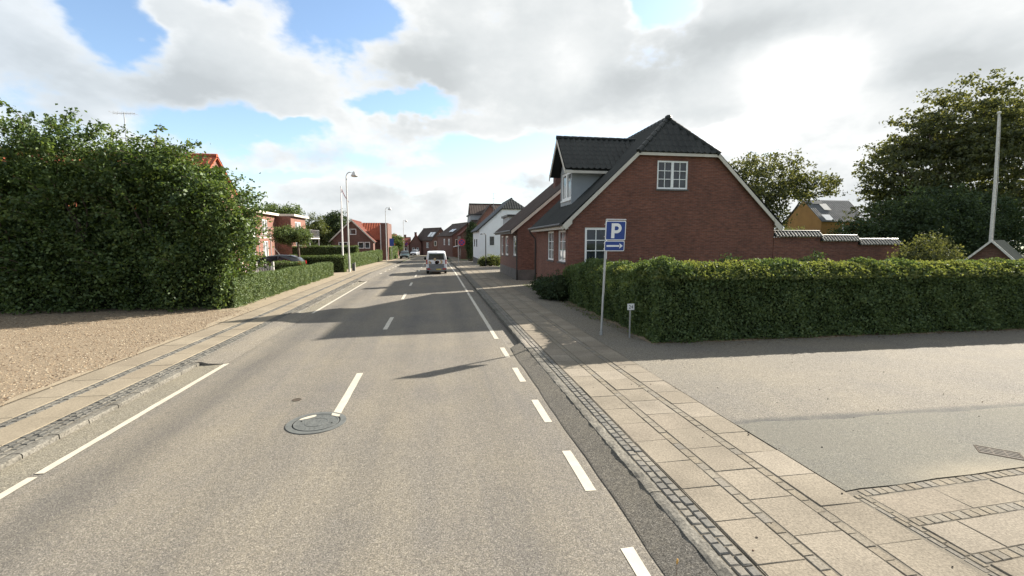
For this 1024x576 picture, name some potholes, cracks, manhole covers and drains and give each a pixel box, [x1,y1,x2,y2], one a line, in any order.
drain grate [974,445,1024,461]
manhole cover [285,412,346,435]
